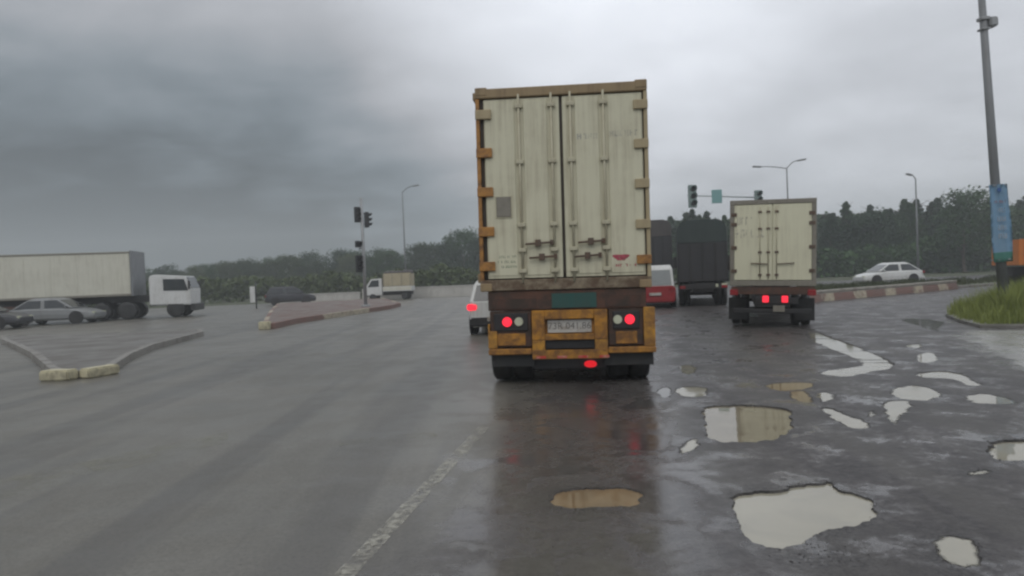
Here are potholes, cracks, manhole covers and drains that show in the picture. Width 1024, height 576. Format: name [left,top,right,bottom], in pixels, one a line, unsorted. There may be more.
pothole [889,385,942,401]
pothole [678,439,701,454]
pothole [700,404,794,443]
pothole [730,480,906,565]
pothole [926,535,985,570]
pothole [789,390,814,402]
pothole [964,393,1018,404]
pothole [820,407,871,429]
pothole [549,487,644,508]
pothole [881,400,914,425]
pothole [764,382,814,391]
pothole [978,439,1024,461]
